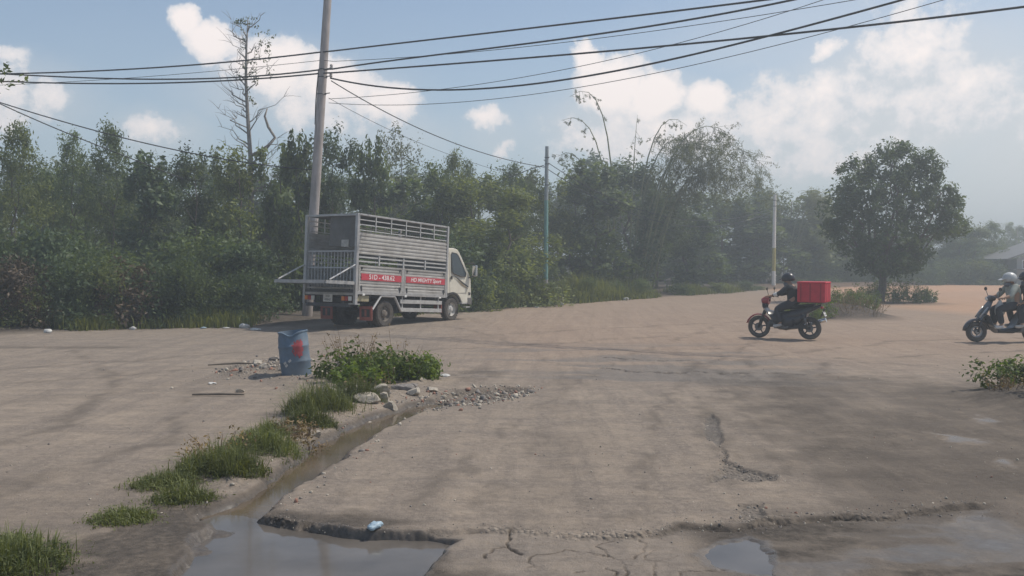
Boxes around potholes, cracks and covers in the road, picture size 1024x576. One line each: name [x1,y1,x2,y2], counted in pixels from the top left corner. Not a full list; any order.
pothole [167,515,463,576]
crack [264,503,990,576]
pothole [694,536,781,576]
